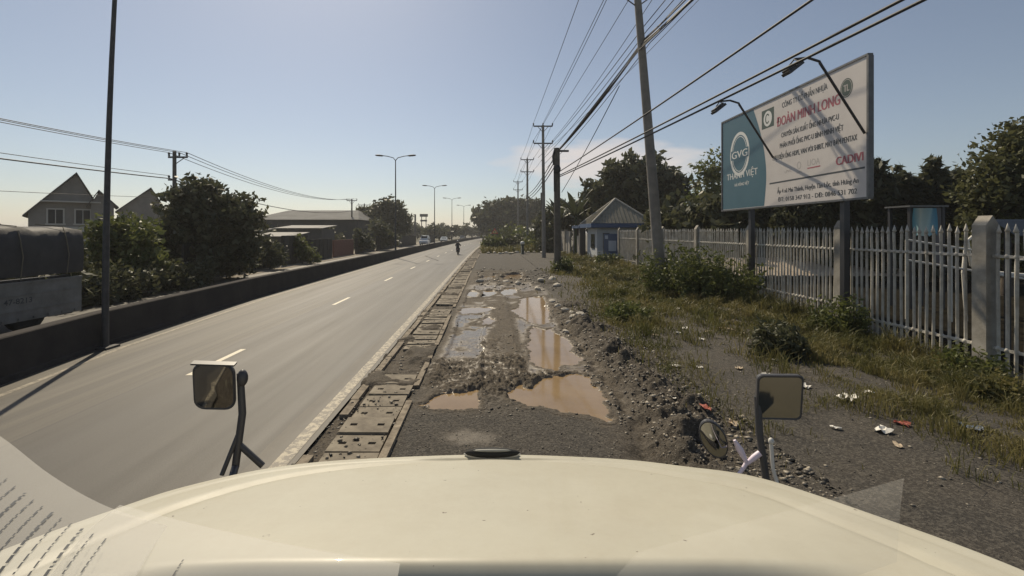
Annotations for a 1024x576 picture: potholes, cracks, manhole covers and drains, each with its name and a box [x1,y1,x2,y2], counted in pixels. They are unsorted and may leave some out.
pothole [464,289,486,298]
pothole [507,295,555,326]
pothole [518,325,588,372]
pothole [478,289,499,297]
pothole [454,305,501,315]
pothole [497,287,521,296]
pothole [477,314,499,326]
pothole [489,369,621,425]
pothole [414,379,489,412]
